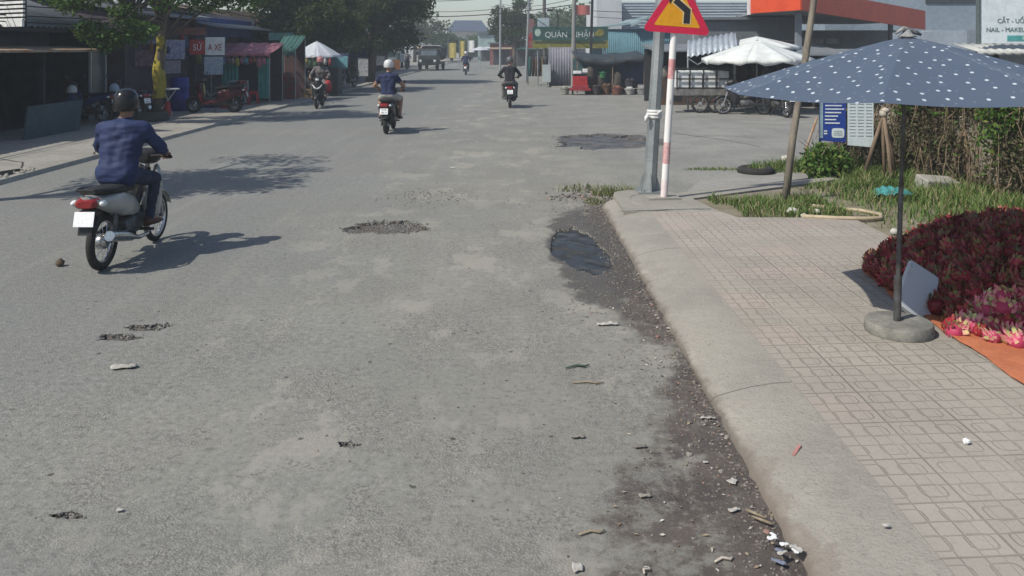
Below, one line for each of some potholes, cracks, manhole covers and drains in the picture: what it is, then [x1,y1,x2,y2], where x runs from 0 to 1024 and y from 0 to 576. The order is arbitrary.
pothole [49,510,87,519]
pothole [337,440,362,448]
pothole [337,219,435,235]
pothole [548,226,618,277]
pothole [550,133,674,151]
pothole [123,322,176,331]
pothole [95,333,143,342]
